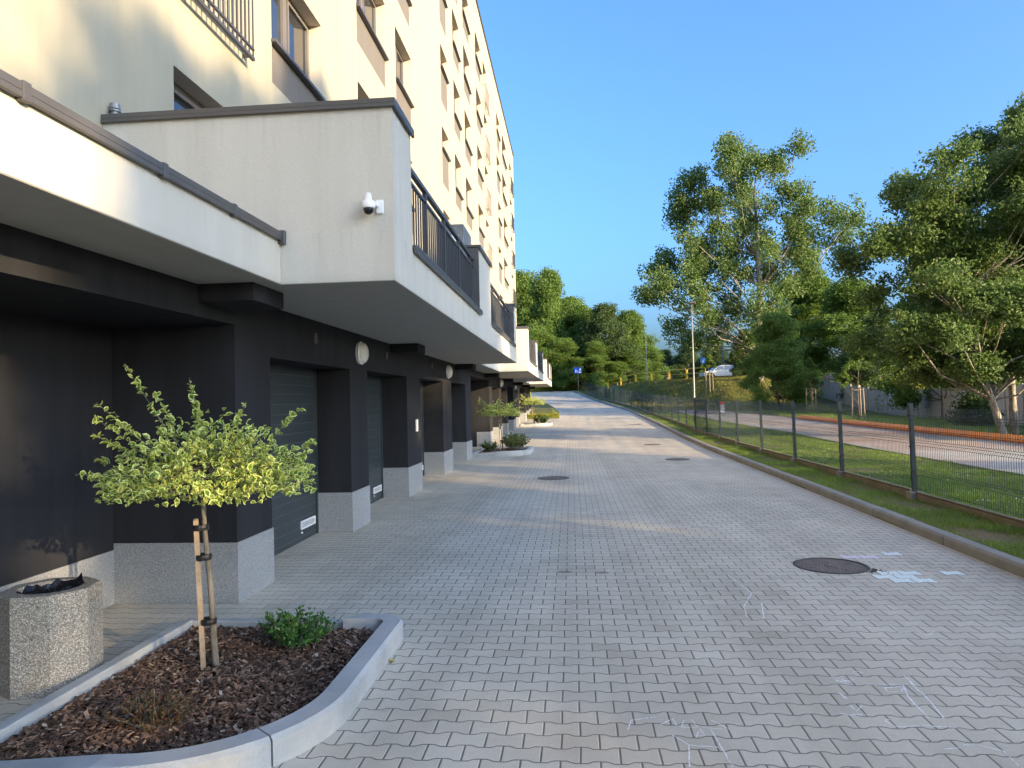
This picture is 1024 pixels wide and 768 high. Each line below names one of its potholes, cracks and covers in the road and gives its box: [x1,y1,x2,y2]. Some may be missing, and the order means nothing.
manhole cover [794,557,870,574]
